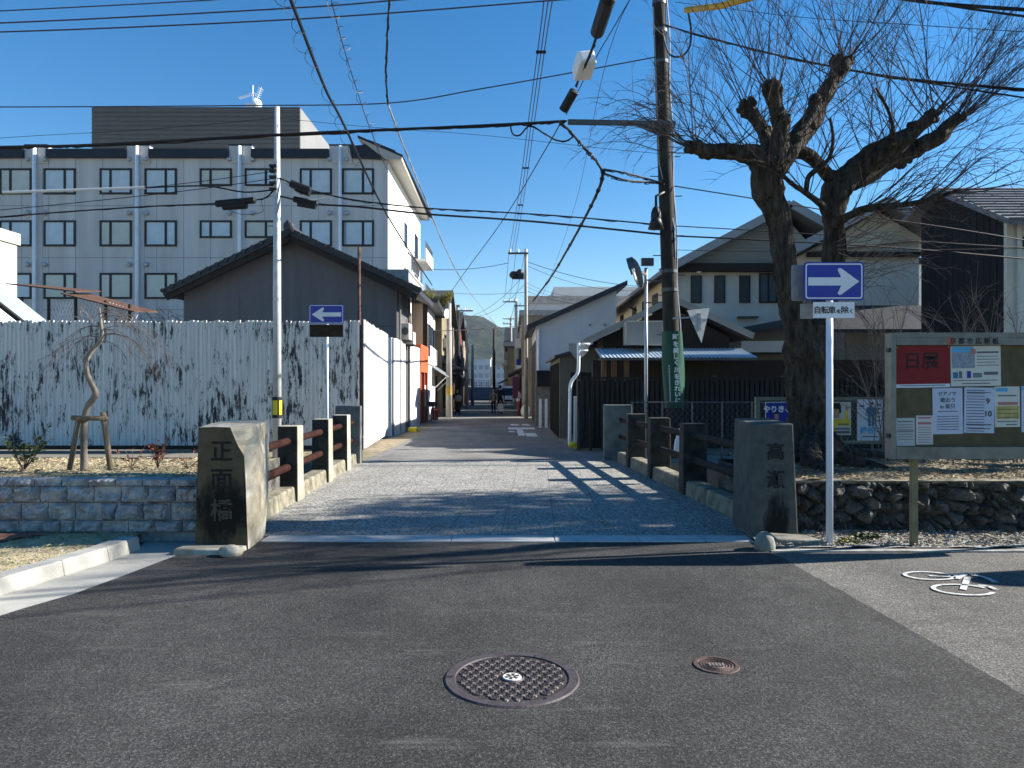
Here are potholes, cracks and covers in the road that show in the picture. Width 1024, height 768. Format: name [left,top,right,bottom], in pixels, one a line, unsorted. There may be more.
manhole cover [693,656,740,674]
manhole cover [444,652,580,708]
